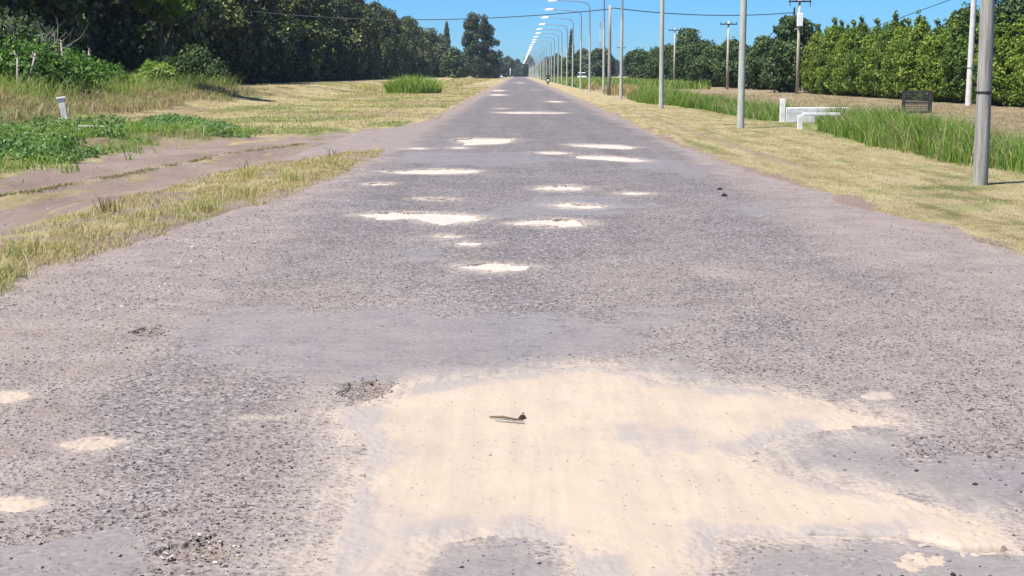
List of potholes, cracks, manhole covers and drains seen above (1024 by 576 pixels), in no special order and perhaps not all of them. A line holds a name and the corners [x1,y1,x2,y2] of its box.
pothole [300,360,1024,576]
